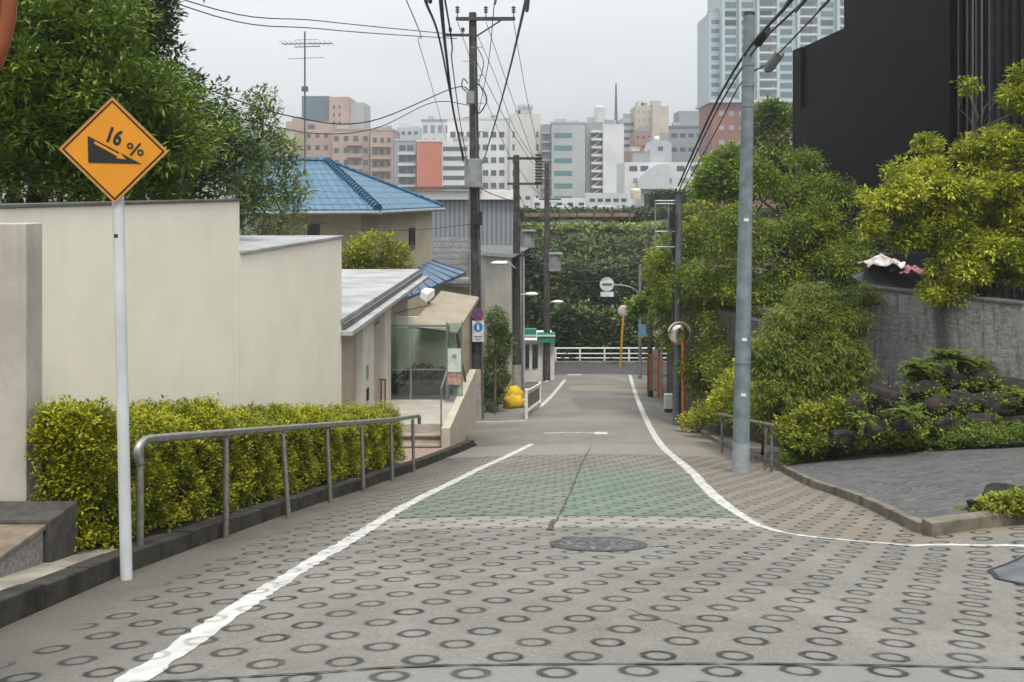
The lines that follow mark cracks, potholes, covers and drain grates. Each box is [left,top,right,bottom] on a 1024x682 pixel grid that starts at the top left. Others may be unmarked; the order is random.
manhole cover [550,537,669,551]
crack [547,445,592,529]
manhole cover [987,555,1024,585]
